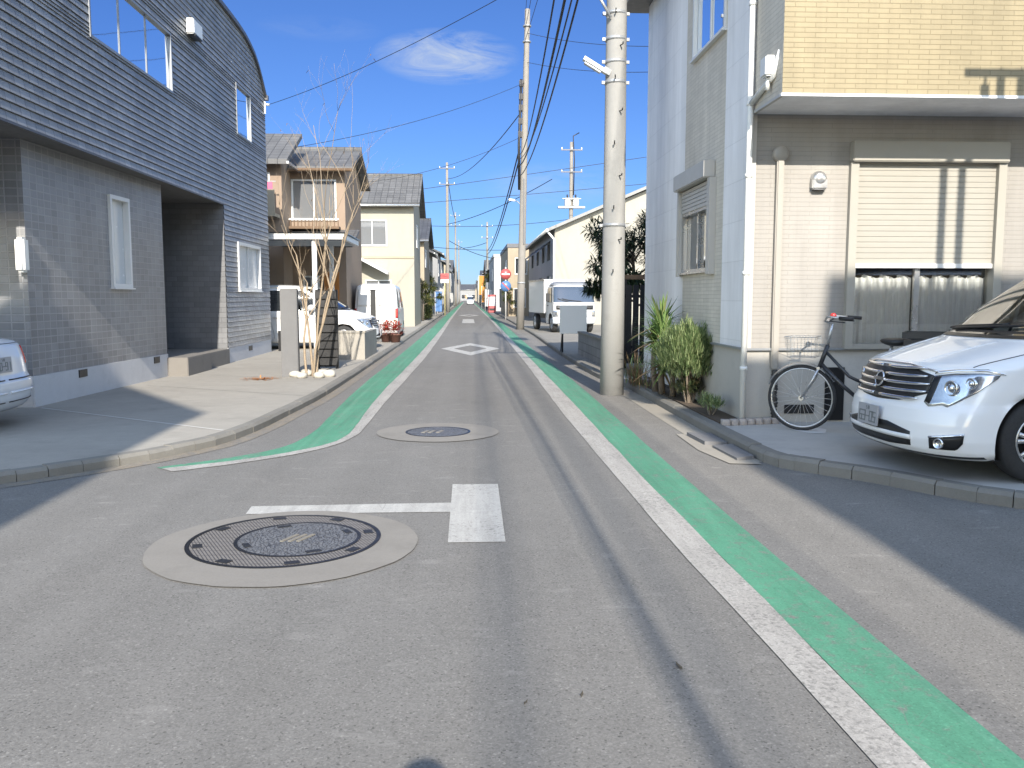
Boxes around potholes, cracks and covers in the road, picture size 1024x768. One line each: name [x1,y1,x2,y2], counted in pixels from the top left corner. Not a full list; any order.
manhole cover [377,423,499,442]
manhole cover [143,511,418,587]
